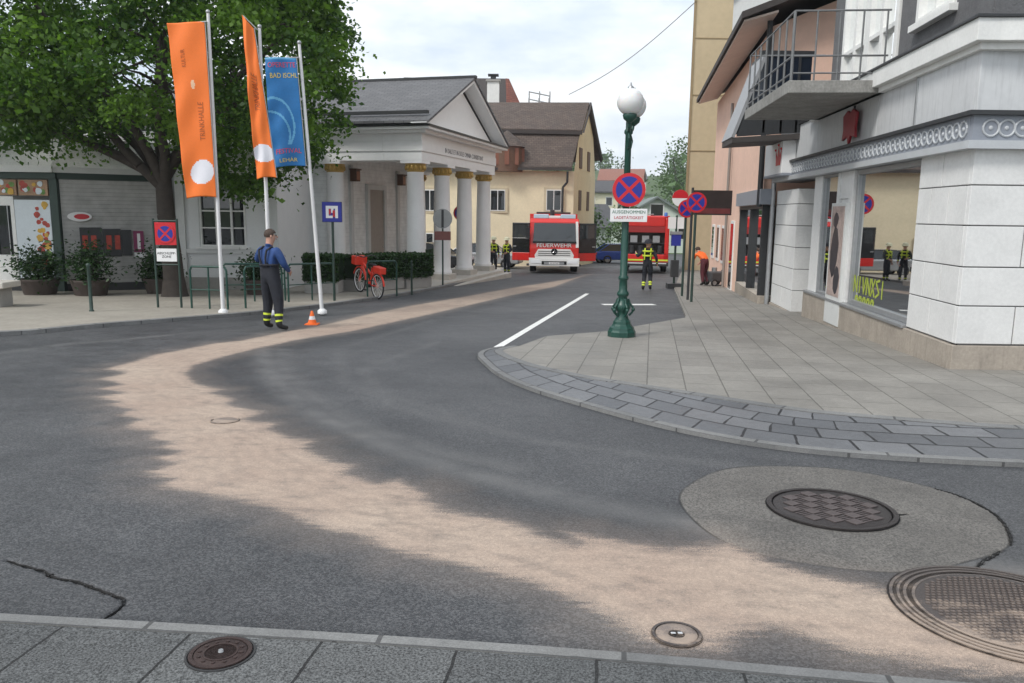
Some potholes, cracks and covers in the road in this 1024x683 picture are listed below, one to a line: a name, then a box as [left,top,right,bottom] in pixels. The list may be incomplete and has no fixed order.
crack [934,488,1013,567]
manhole cover [184,636,256,672]
manhole cover [887,565,1024,663]
manhole cover [651,621,703,647]
manhole cover [765,488,900,532]
crack [7,560,125,619]
